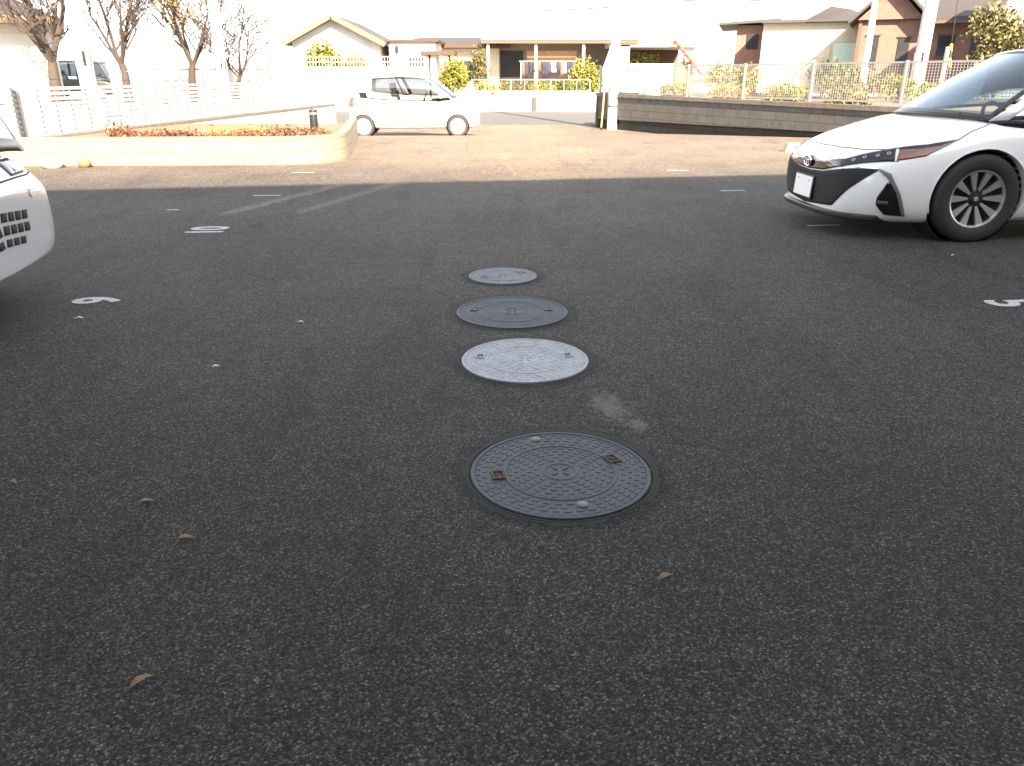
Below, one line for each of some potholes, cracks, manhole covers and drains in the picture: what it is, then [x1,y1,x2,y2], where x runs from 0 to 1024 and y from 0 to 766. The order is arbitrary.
manhole cover [450,295,575,331]
manhole cover [464,267,543,286]
manhole cover [453,337,595,387]
manhole cover [460,428,661,527]
